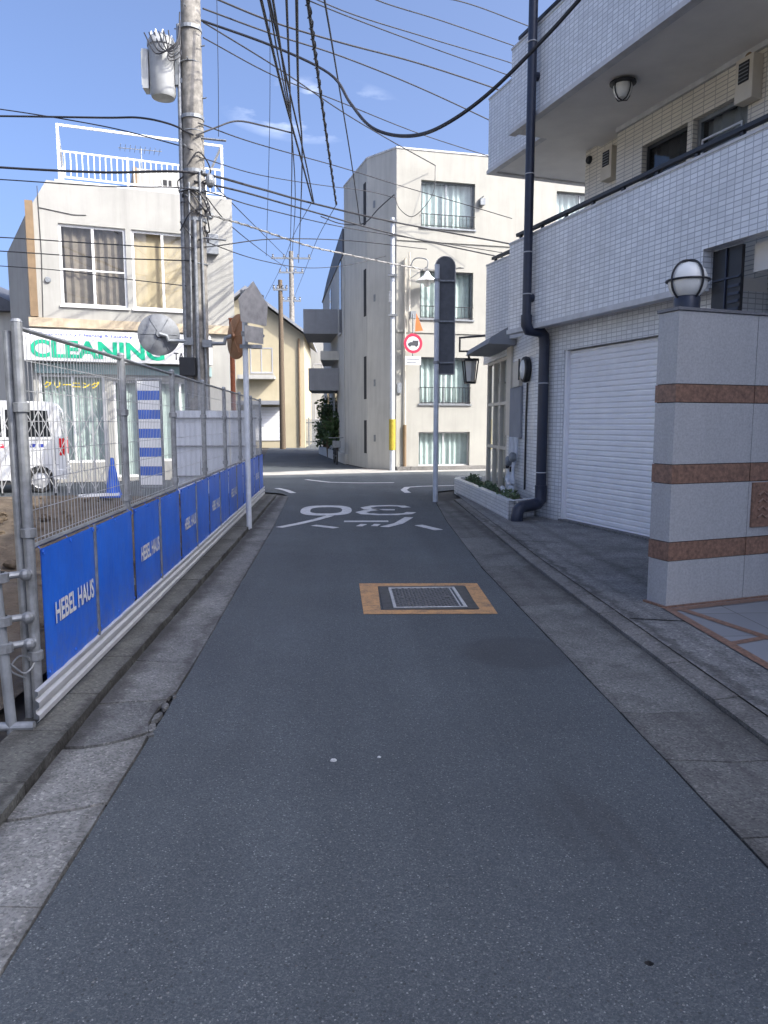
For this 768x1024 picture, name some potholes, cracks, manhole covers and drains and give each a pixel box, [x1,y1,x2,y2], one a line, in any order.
manhole cover [378,585,480,610]
